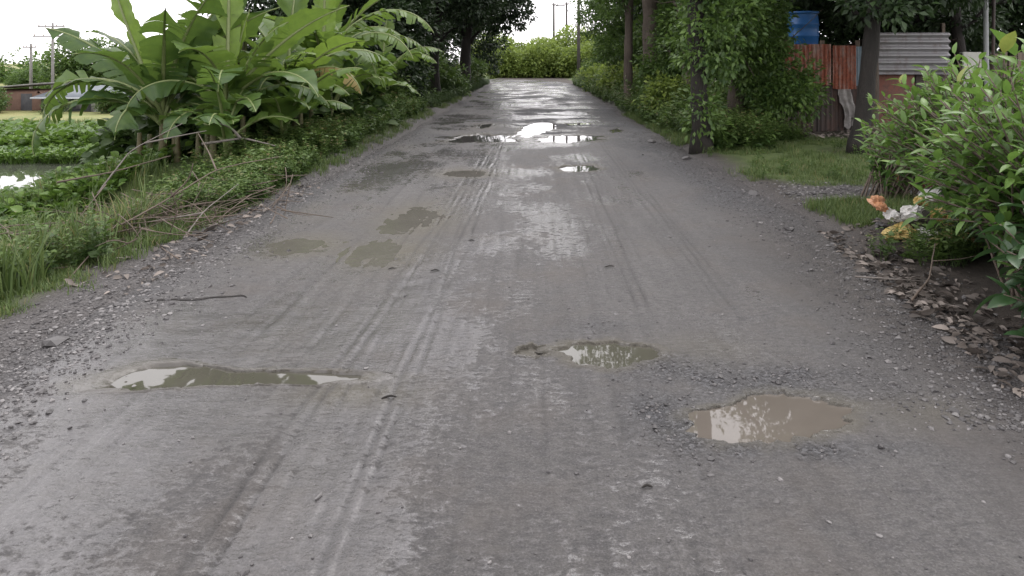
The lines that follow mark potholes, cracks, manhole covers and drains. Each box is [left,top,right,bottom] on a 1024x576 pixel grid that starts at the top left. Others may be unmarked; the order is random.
pothole [536,339,673,373]
pothole [434,132,527,144]
pothole [72,358,394,394]
pothole [511,342,551,359]
pothole [554,164,606,173]
pothole [671,386,874,450]
pothole [527,133,616,144]
